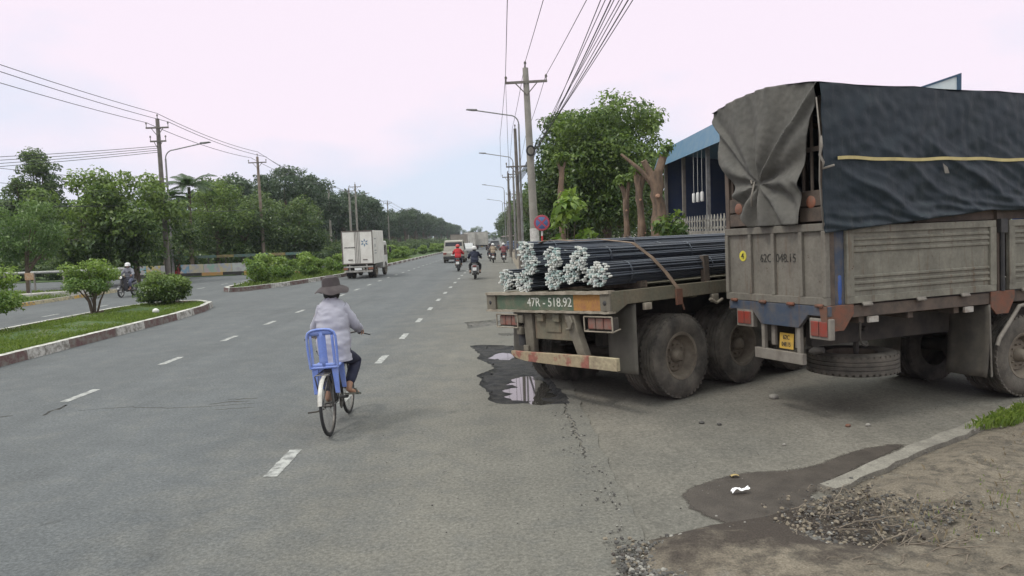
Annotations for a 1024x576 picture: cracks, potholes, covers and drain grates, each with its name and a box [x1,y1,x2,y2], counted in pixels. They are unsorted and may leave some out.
crack [42,398,254,416]
pothole [470,345,570,405]
